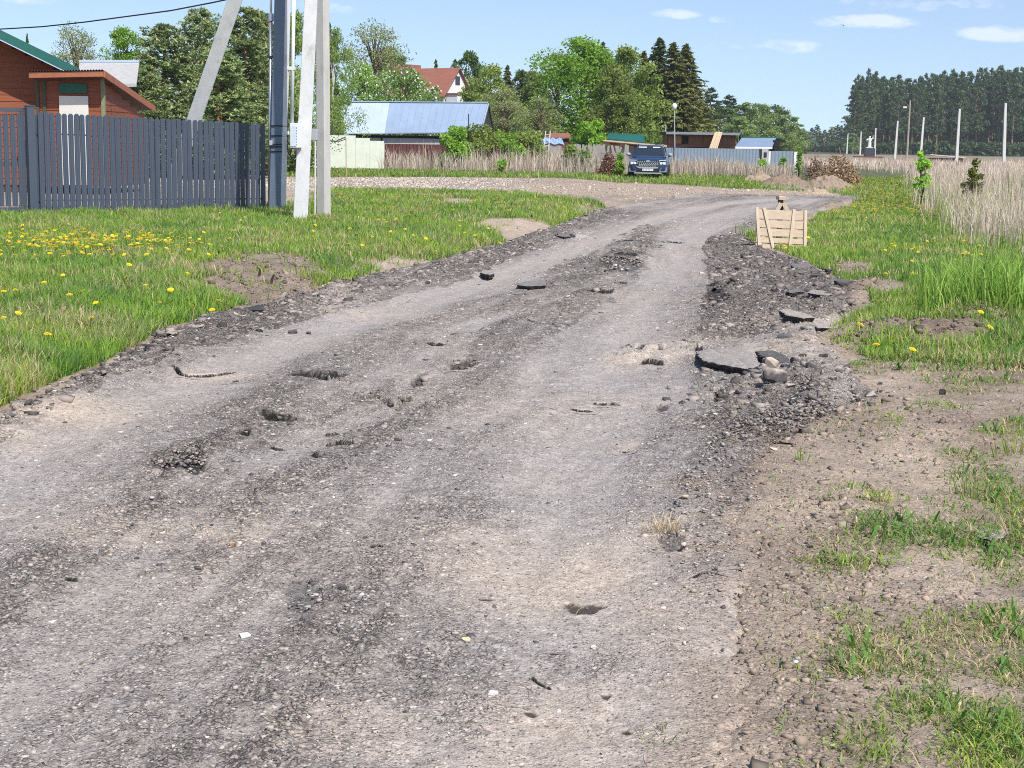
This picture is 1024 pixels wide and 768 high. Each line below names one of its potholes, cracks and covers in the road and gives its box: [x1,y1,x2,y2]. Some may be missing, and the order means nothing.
crack [157,357,254,385]
pothole [133,439,227,478]
pothole [548,599,626,620]
pothole [691,284,739,307]
pothole [700,379,738,404]
